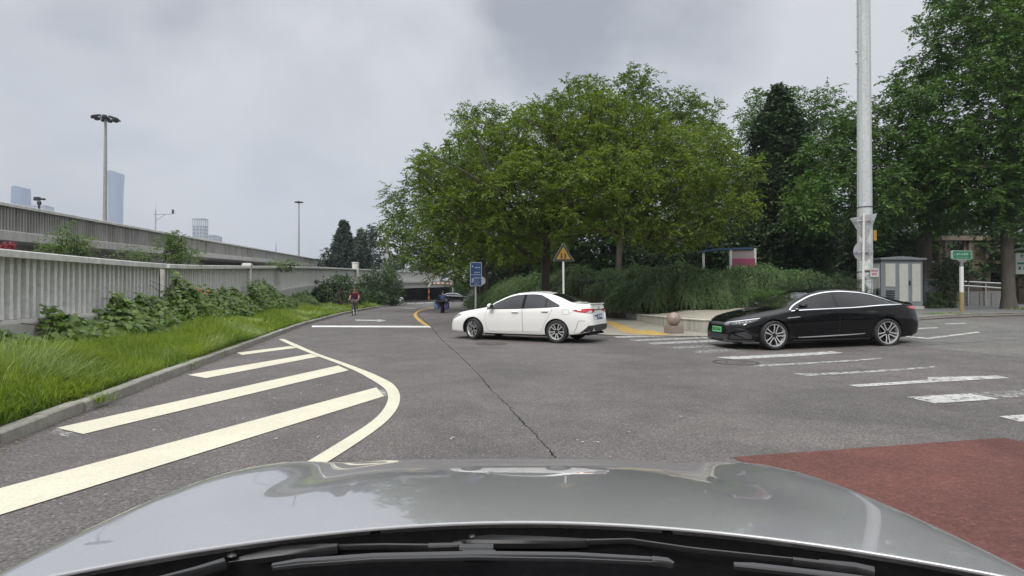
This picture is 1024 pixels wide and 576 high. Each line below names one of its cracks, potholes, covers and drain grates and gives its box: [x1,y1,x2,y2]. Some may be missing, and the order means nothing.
crack [418,309,557,459]
